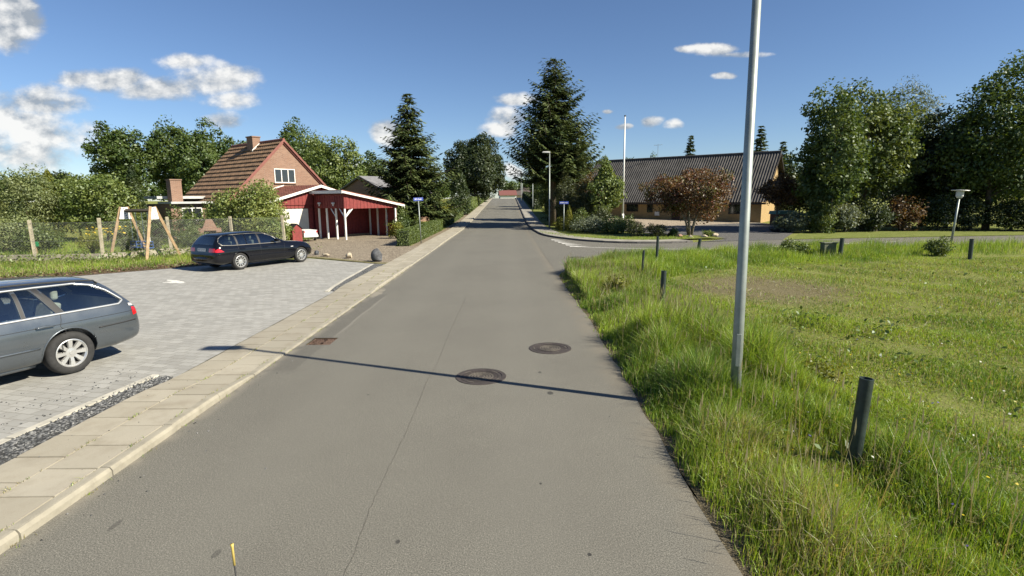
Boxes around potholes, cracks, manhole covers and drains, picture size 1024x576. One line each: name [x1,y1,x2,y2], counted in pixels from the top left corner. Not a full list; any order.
manhole cover [529,342,571,354]
manhole cover [456,368,506,385]
